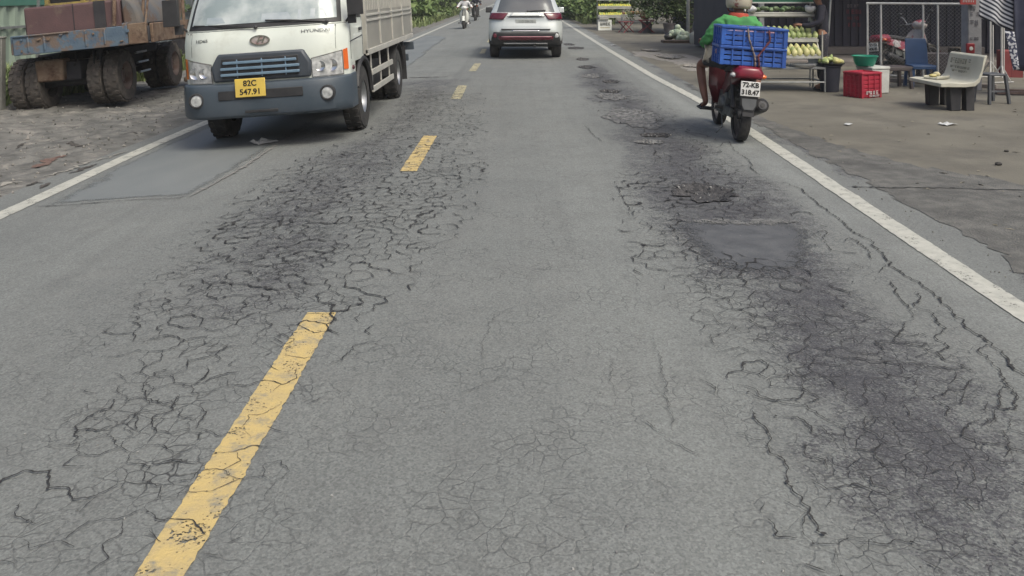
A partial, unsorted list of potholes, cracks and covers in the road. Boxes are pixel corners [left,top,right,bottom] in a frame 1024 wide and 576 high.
crack [997,385,1018,409]
crack [752,410,828,535]
crack [747,382,805,401]
pothole [595,93,630,101]
pothole [602,107,663,129]
pothole [672,182,739,204]
crack [71,399,115,443]
crack [639,338,699,454]
crack [782,182,1024,374]
